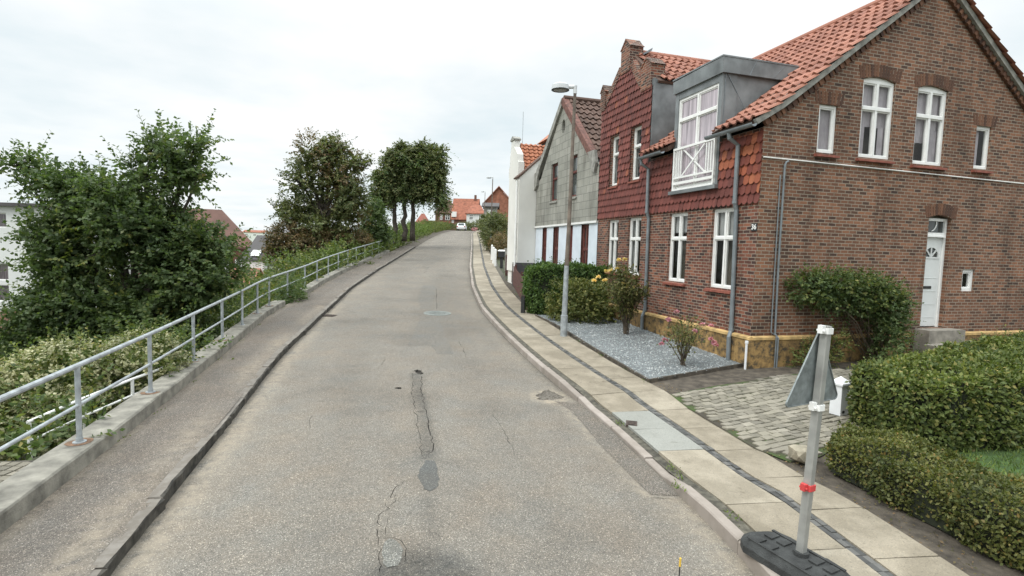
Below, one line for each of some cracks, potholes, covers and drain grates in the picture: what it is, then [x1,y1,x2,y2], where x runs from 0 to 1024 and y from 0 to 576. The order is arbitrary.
pothole [536,390,564,400]
crack [376,481,407,572]
